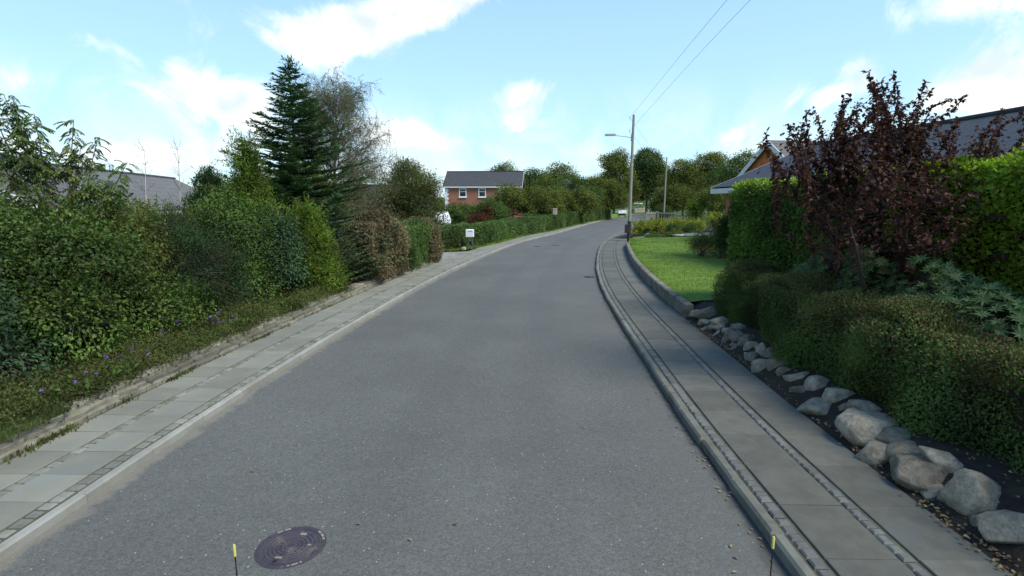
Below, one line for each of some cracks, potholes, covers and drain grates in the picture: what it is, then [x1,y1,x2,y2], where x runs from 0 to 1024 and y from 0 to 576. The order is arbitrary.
manhole cover [254,526,327,569]
